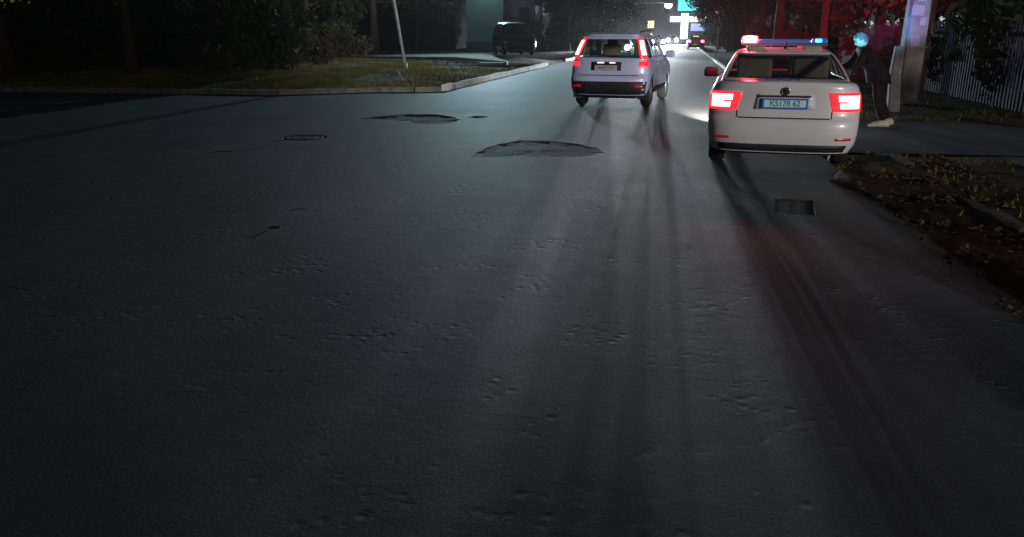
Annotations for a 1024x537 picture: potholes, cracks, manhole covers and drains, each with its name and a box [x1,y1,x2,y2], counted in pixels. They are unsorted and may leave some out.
crack [248,208,305,242]
pothole [472,140,602,158]
pothole [361,114,461,124]
